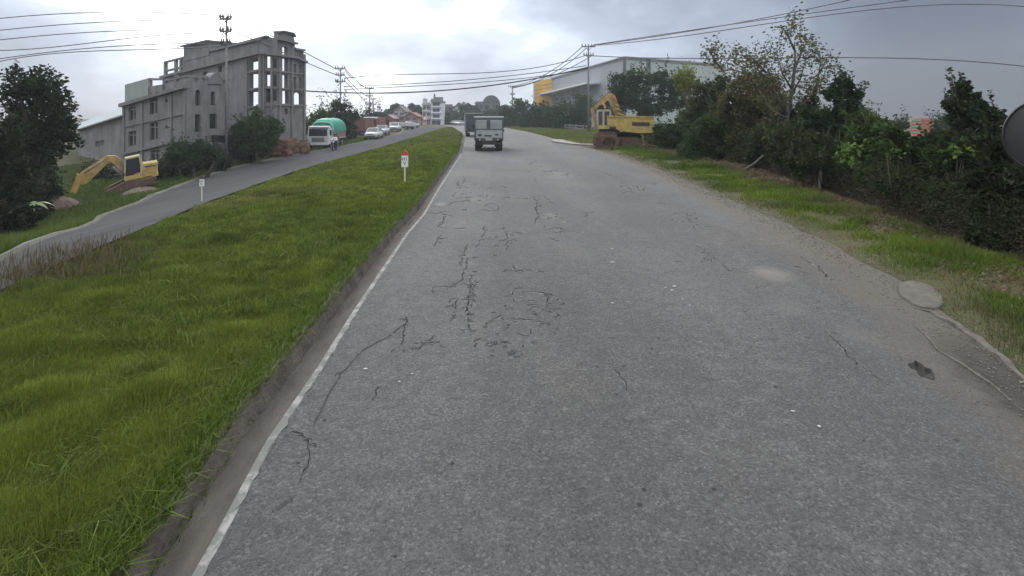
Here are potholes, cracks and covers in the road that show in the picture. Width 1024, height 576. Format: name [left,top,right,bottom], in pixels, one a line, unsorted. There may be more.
crack [273,162,745,512]
manhole cover [898,280,943,310]
crack [825,331,881,380]
pothole [908,360,935,380]
